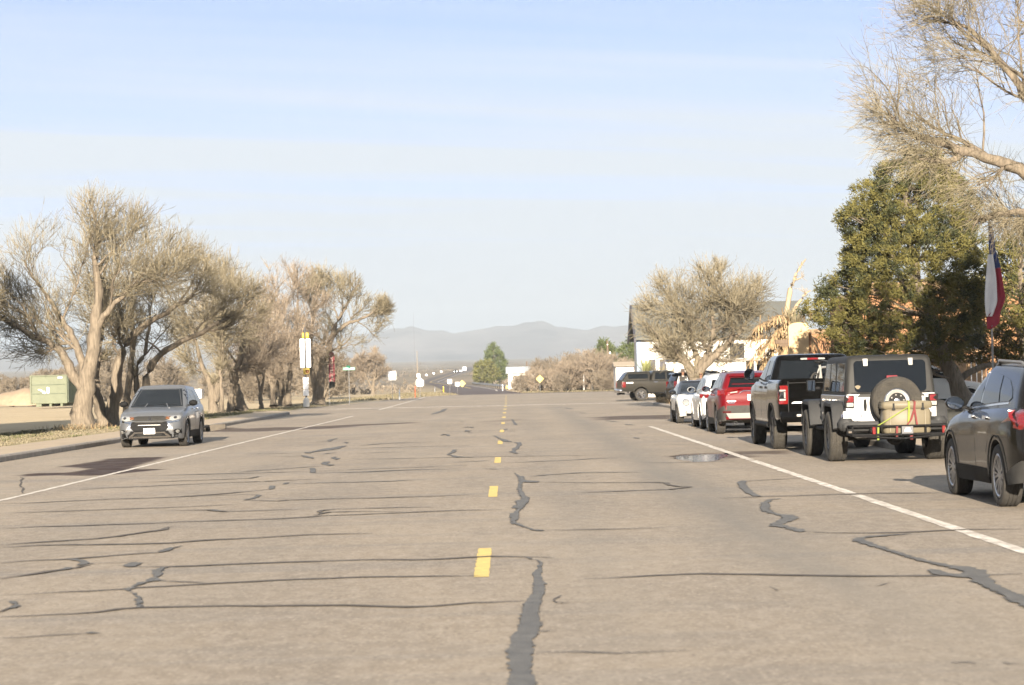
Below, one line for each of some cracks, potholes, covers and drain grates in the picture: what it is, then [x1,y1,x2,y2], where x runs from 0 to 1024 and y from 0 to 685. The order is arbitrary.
crack [0,408,618,547]
pothole [669,453,728,462]
crack [607,533,1024,606]
